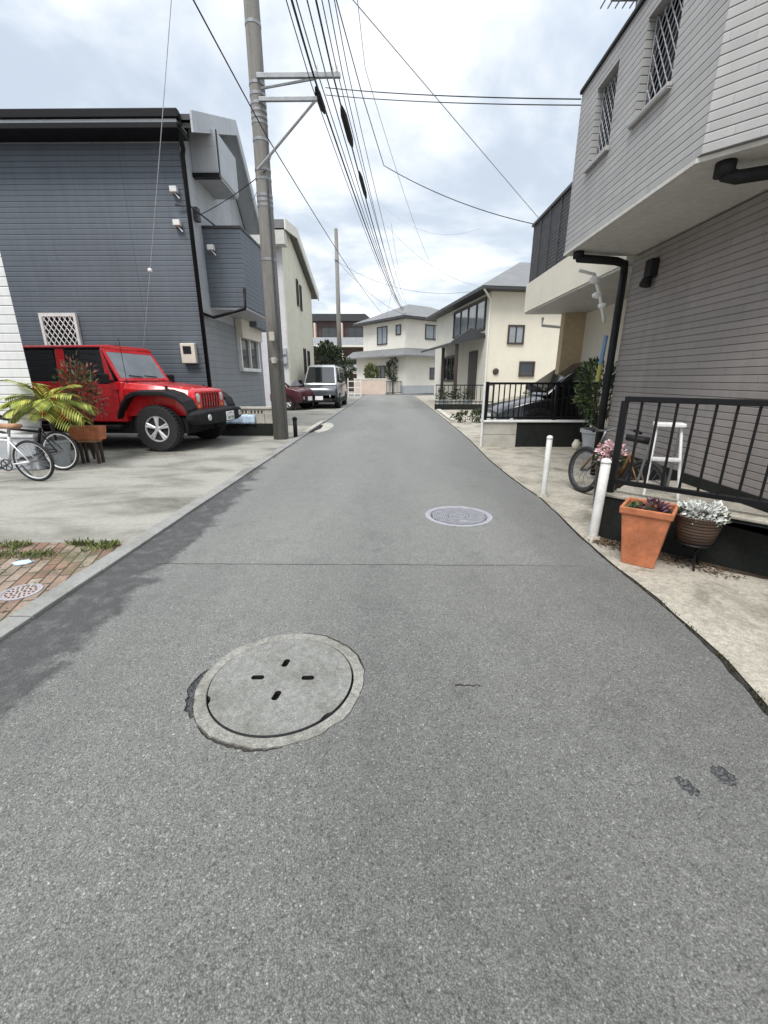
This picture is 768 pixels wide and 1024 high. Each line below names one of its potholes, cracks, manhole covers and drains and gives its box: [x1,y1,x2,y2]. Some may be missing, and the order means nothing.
manhole cover [425,506,493,527]
pothole [184,669,210,719]
pothole [673,776,700,798]
manhole cover [193,633,364,749]
pothole [710,765,738,786]
